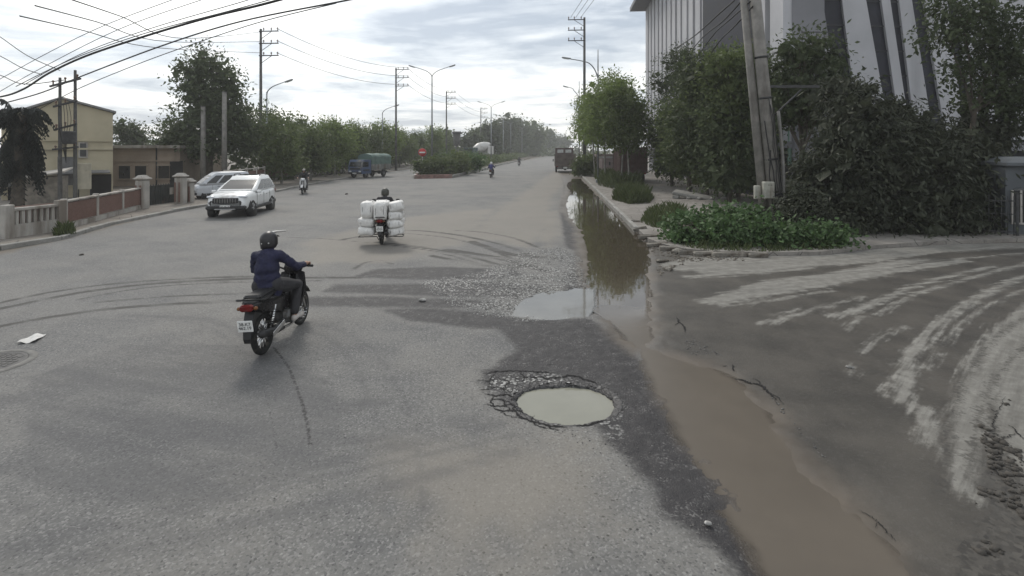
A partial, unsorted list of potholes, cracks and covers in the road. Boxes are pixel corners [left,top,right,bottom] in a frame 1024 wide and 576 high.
pothole [505,380,628,427]
crack [989,401,1024,475]
manhole cover [0,349,38,372]
